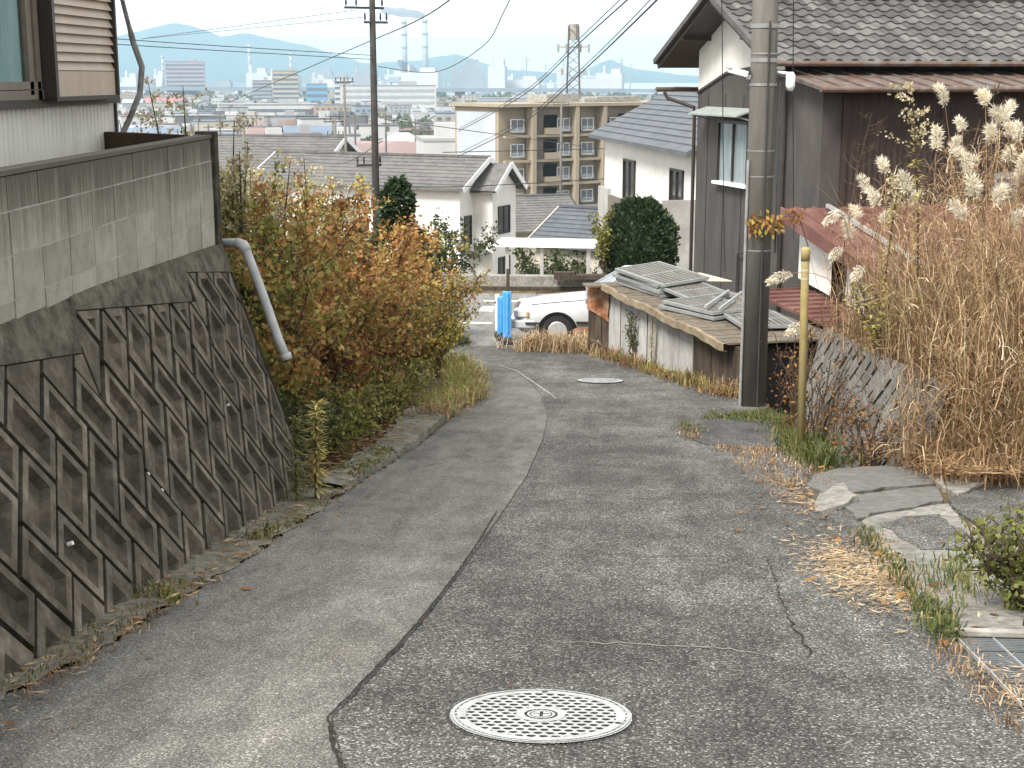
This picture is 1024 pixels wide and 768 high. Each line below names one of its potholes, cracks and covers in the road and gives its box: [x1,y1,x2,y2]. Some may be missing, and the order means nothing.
crack [581,641,773,657]
crack [740,555,828,658]
manhole cover [447,689,636,746]
drain grate [952,628,1024,707]
